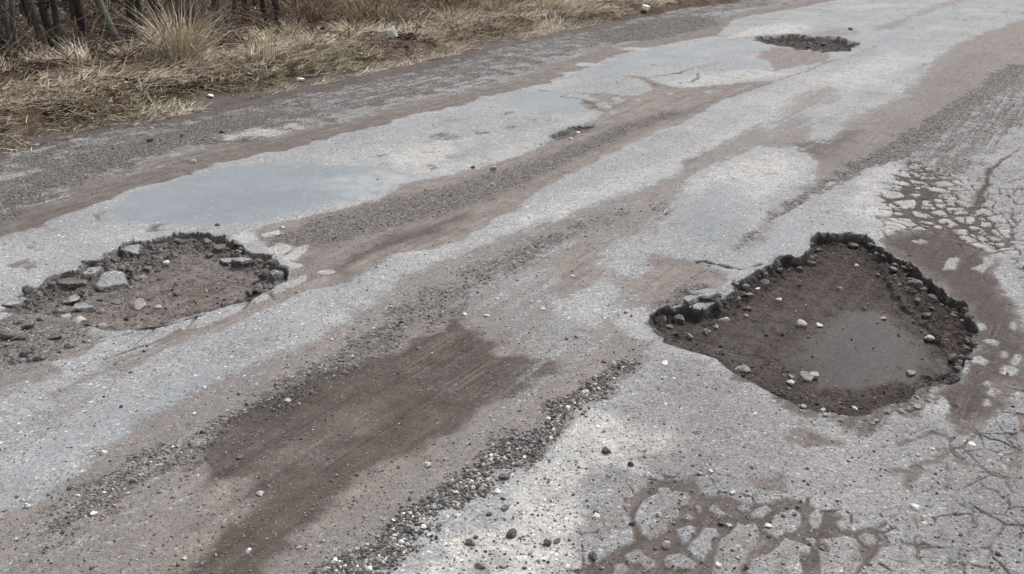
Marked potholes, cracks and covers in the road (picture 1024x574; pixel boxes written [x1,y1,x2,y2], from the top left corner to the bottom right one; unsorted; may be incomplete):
crack [560,65,700,109]
pothole [755,34,859,53]
crack [875,100,1024,279]
pothole [551,125,596,140]
pothole [647,231,979,417]
pothole [2,231,289,331]
crack [569,380,1024,574]
